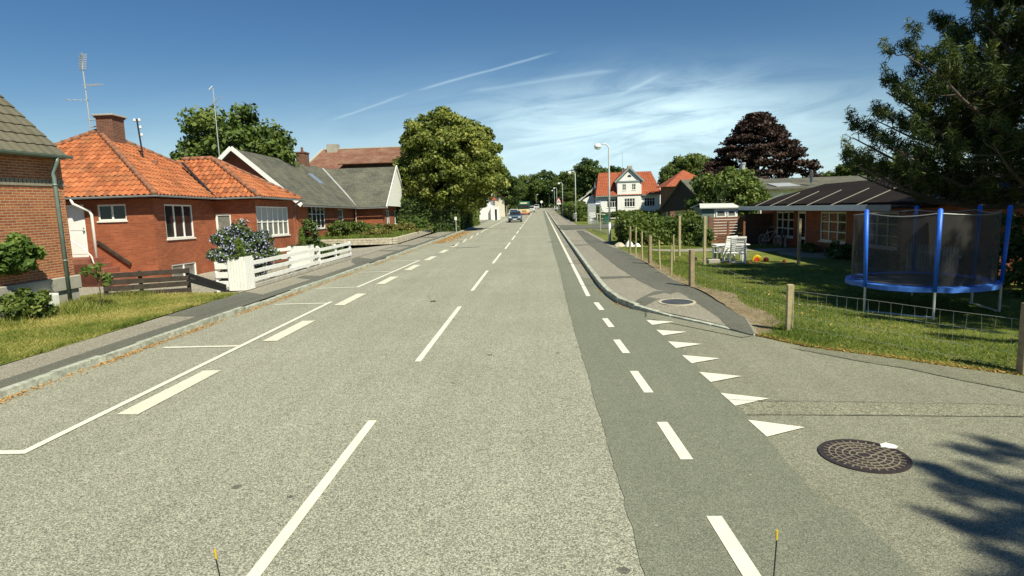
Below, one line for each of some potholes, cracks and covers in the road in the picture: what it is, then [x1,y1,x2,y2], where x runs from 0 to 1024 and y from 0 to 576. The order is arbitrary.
manhole cover [818,439,913,474]
